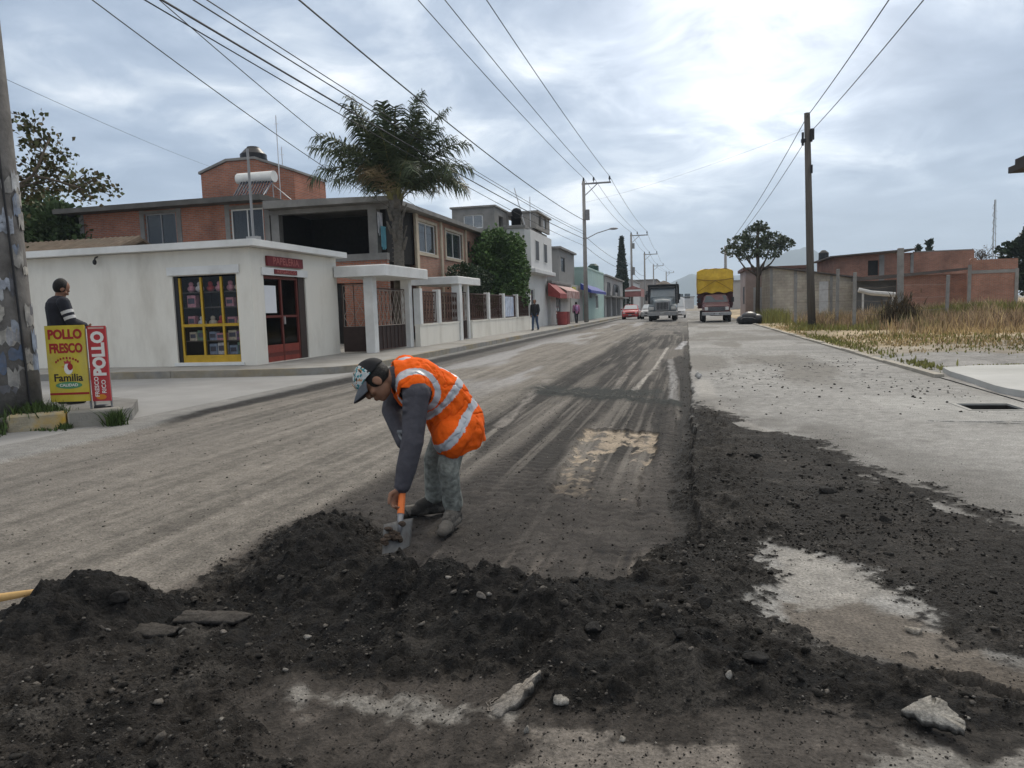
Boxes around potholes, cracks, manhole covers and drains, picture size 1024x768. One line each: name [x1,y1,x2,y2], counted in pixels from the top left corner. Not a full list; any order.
drain grate [950,403,1024,411]
